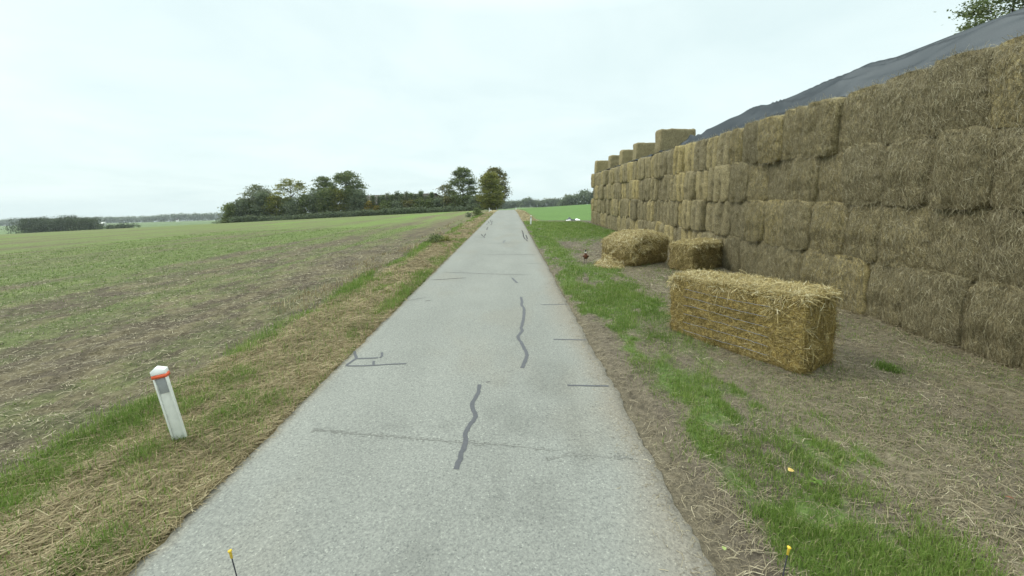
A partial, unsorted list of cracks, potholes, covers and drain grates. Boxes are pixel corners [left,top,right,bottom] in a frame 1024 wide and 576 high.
crack [436,220,535,280]
crack [311,427,638,463]
